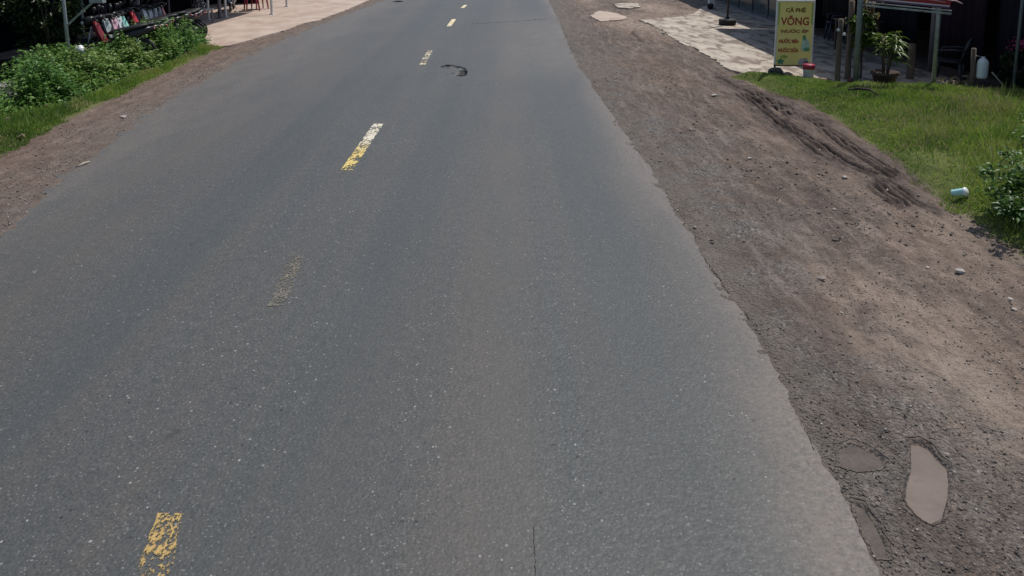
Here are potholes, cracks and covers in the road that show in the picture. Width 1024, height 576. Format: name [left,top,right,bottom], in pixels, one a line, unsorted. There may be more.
pothole [437,65,468,77]
pothole [850,497,894,561]
pothole [833,439,889,472]
pothole [899,436,955,525]
